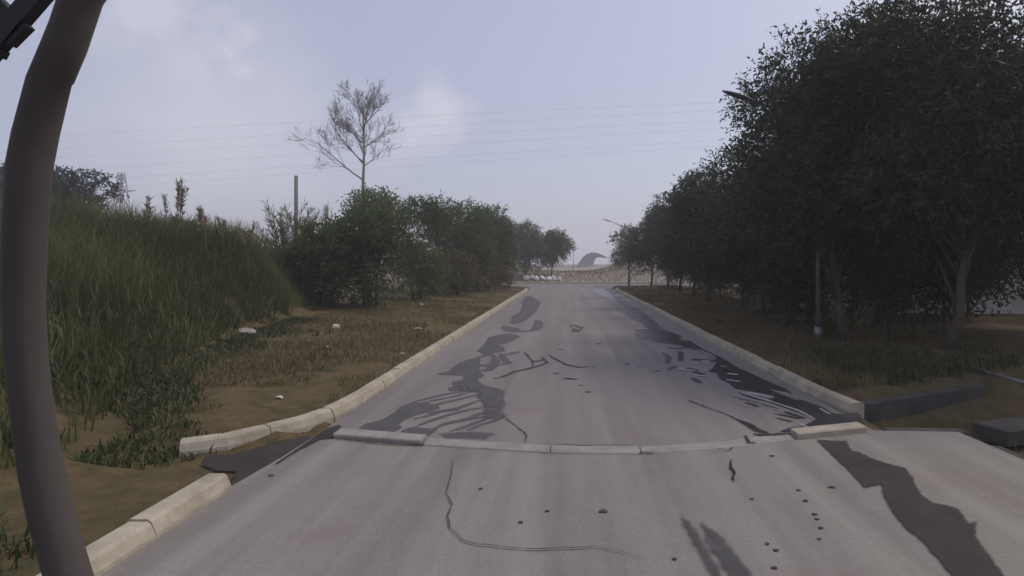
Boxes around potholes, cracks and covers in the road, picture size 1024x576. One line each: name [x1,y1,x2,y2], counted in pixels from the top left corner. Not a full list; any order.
crack [493,352,594,379]
crack [719,447,736,481]
crack [446,459,642,557]
